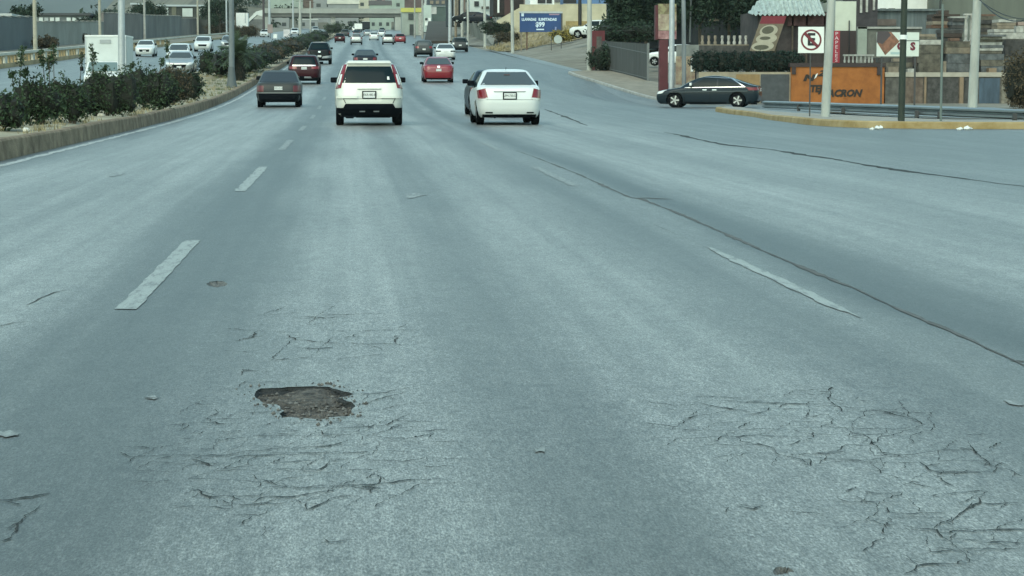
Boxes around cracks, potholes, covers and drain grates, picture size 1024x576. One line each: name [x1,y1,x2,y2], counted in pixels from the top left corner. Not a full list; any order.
pothole [236,380,368,426]
crack [2,493,49,541]
crack [782,487,1024,574]
crack [121,306,454,543]
crack [649,386,1021,511]
